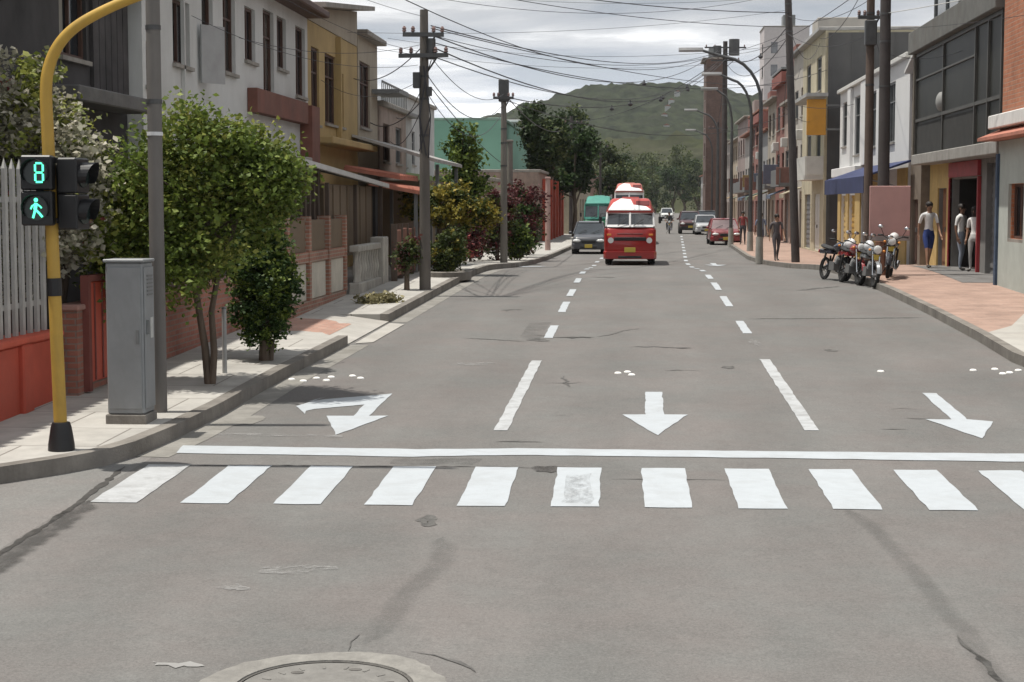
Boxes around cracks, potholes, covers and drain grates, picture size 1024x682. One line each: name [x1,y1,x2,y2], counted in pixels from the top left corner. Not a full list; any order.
manhole cover [199,652,446,682]
crack [471,328,688,348]
crack [413,651,476,672]
